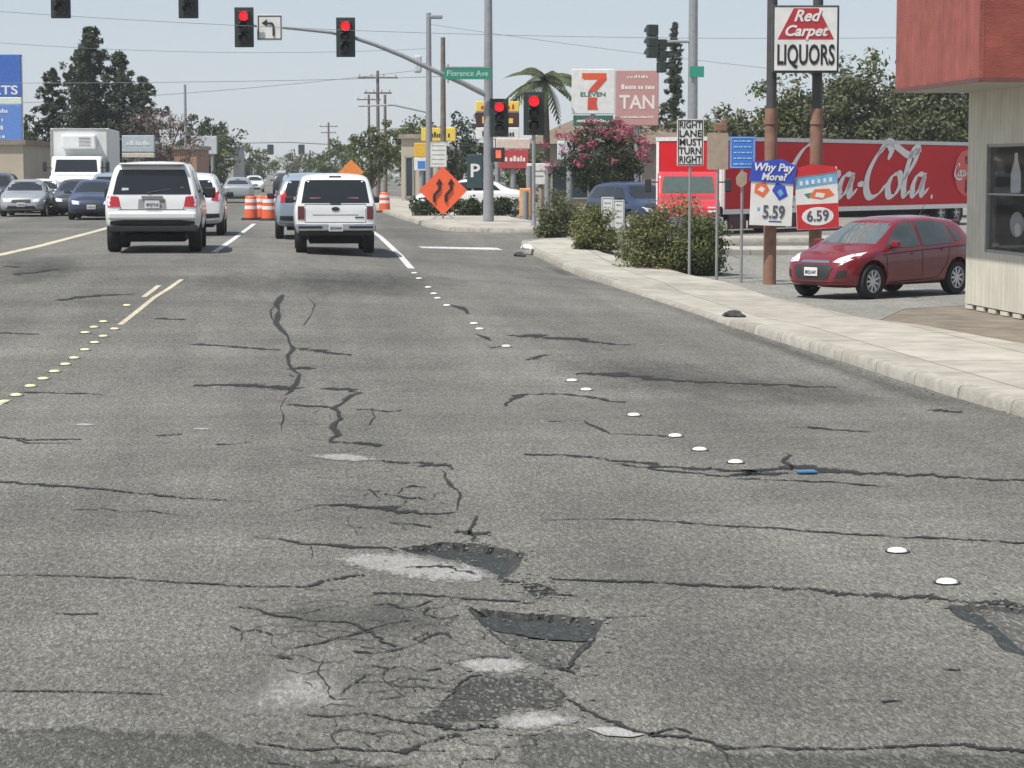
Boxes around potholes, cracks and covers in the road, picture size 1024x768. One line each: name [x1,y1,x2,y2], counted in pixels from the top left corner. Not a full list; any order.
crack [524,452,1024,486]
pothole [467,608,604,670]
crack [0,480,261,515]
crack [546,518,1024,543]
pothole [398,542,525,578]
crack [189,295,492,559]
crack [5,574,1024,768]
